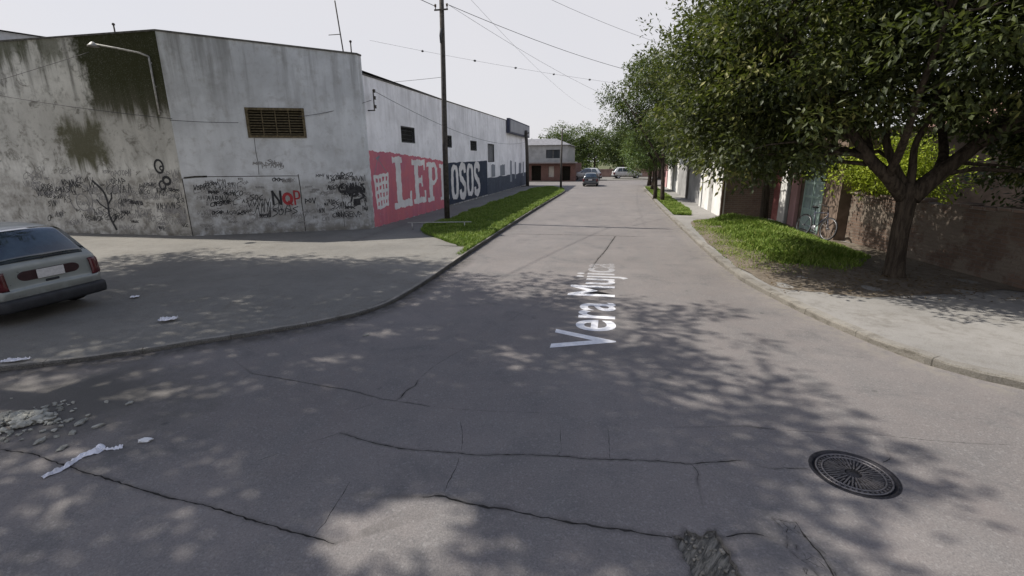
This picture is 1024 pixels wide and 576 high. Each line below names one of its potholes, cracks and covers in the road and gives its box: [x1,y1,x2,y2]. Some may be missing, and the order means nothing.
manhole cover [808,450,903,499]
crack [341,430,742,479]
pothole [673,530,741,576]
crack [726,518,836,576]
crack [257,348,553,414]
